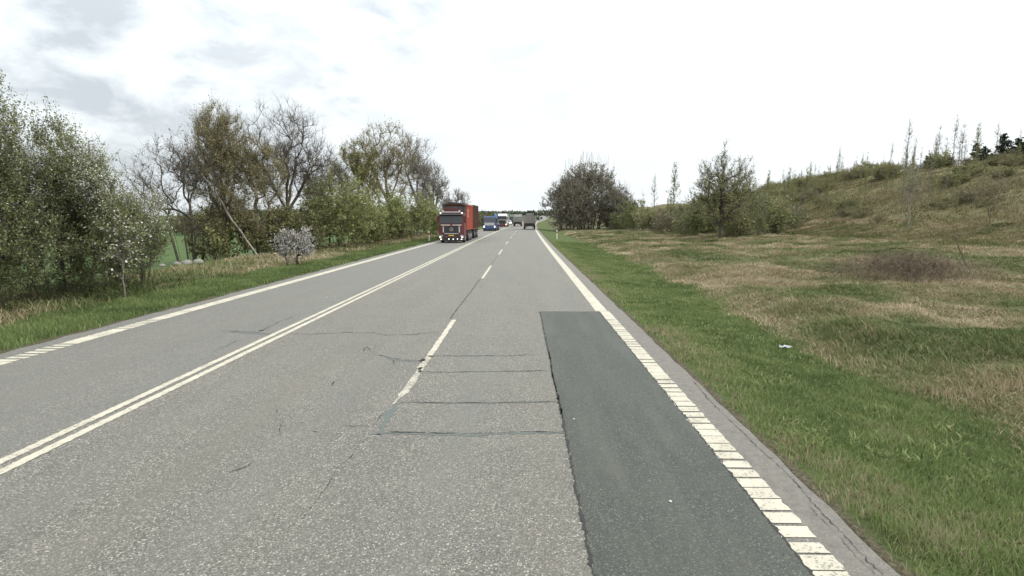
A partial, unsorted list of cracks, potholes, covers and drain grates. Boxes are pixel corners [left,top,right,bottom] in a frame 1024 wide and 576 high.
crack [222,317,430,364]
